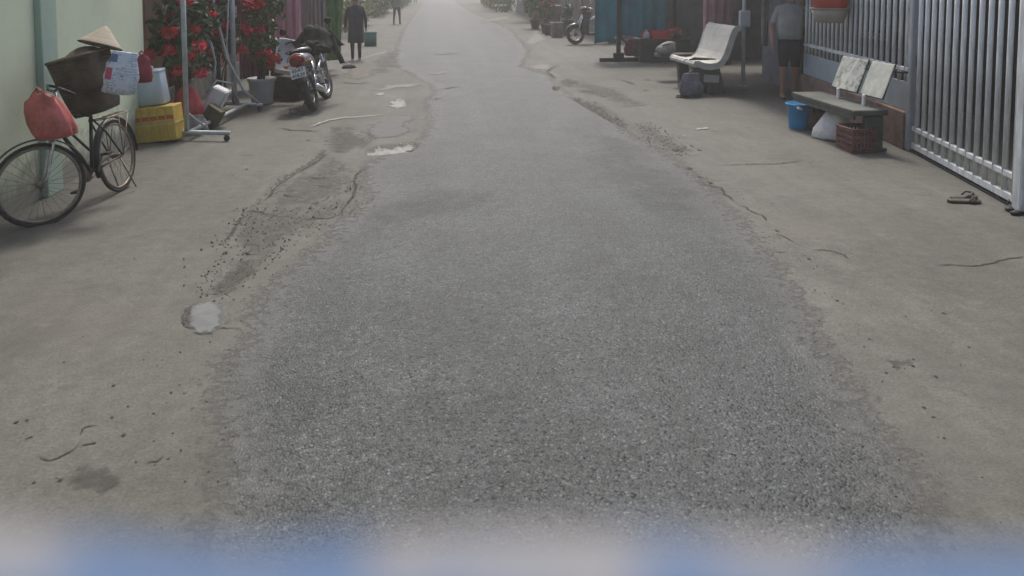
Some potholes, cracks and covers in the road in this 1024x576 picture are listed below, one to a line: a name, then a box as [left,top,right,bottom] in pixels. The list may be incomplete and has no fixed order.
crack [24,425,95,461]
crack [704,183,792,252]
crack [936,256,1023,266]
pothole [366,142,416,156]
crack [222,165,374,255]
